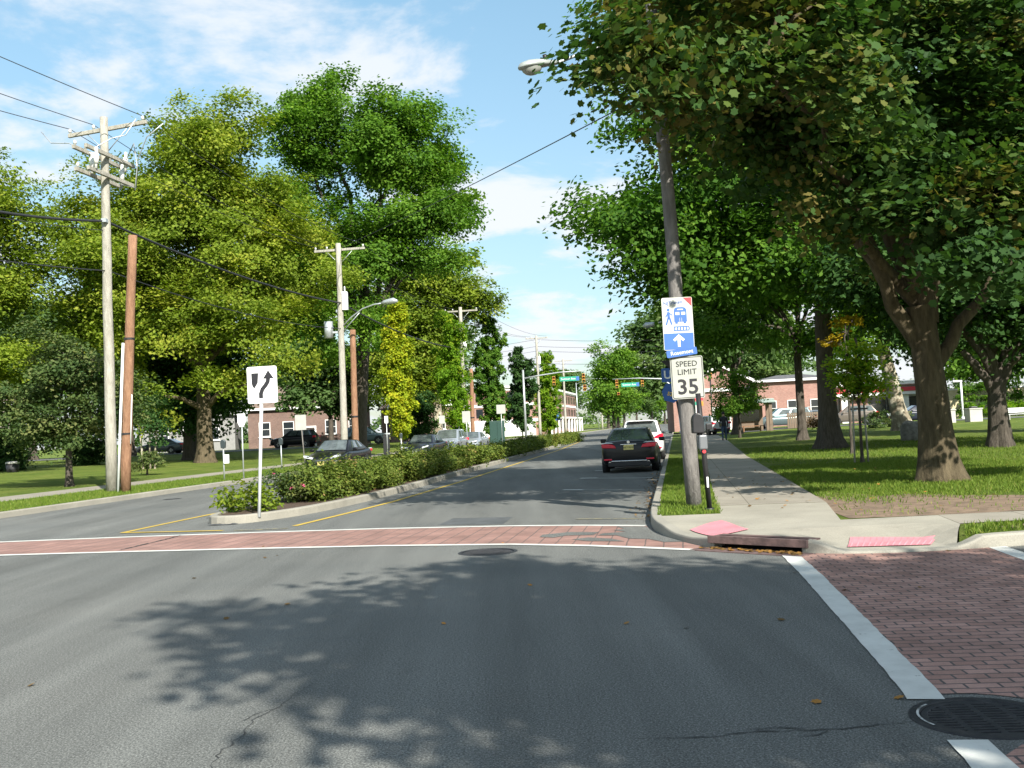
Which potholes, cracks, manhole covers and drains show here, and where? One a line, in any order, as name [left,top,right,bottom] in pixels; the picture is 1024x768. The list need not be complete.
manhole cover [908,697,1024,740]
drain grate [690,533,820,557]
manhole cover [458,548,518,556]
crack [639,721,912,739]
crack [210,684,313,768]
